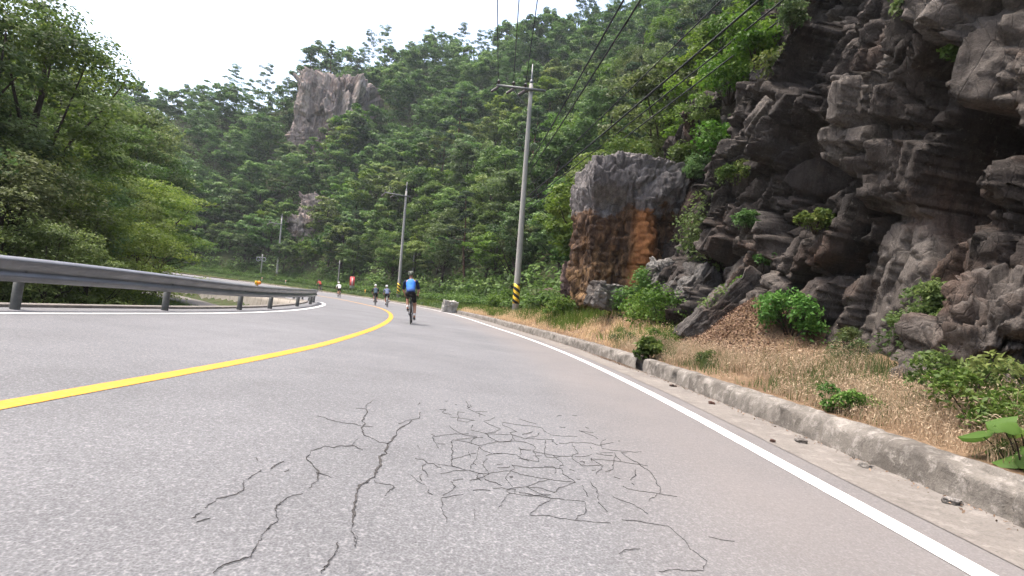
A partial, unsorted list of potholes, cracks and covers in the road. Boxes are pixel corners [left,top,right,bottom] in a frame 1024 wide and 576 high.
crack [191,457,289,522]
crack [213,400,735,573]
